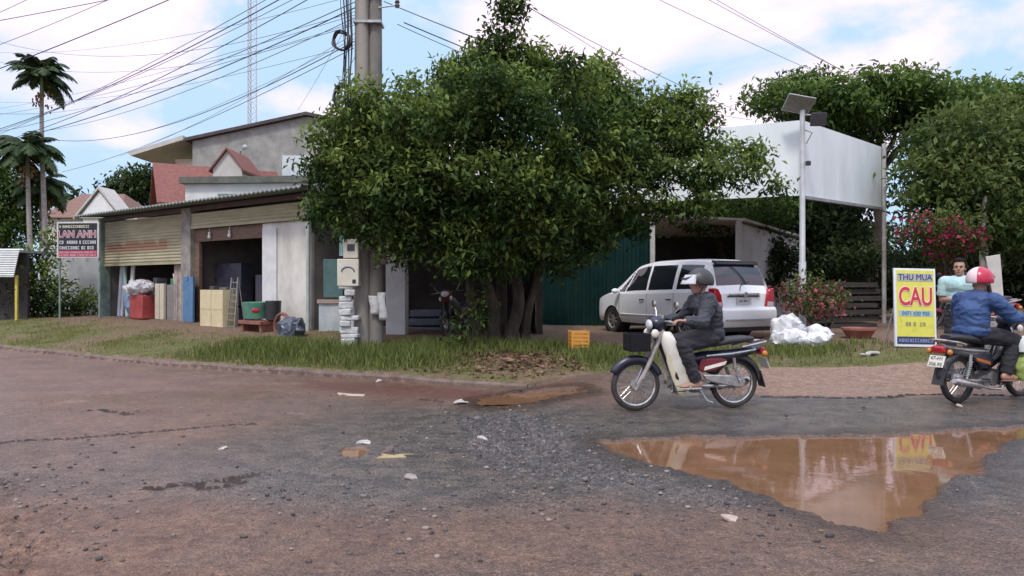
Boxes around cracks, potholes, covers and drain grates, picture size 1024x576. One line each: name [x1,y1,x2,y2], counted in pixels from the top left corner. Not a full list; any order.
pothole [478,386,590,406]
pothole [596,424,1024,532]
crack [0,409,263,444]
